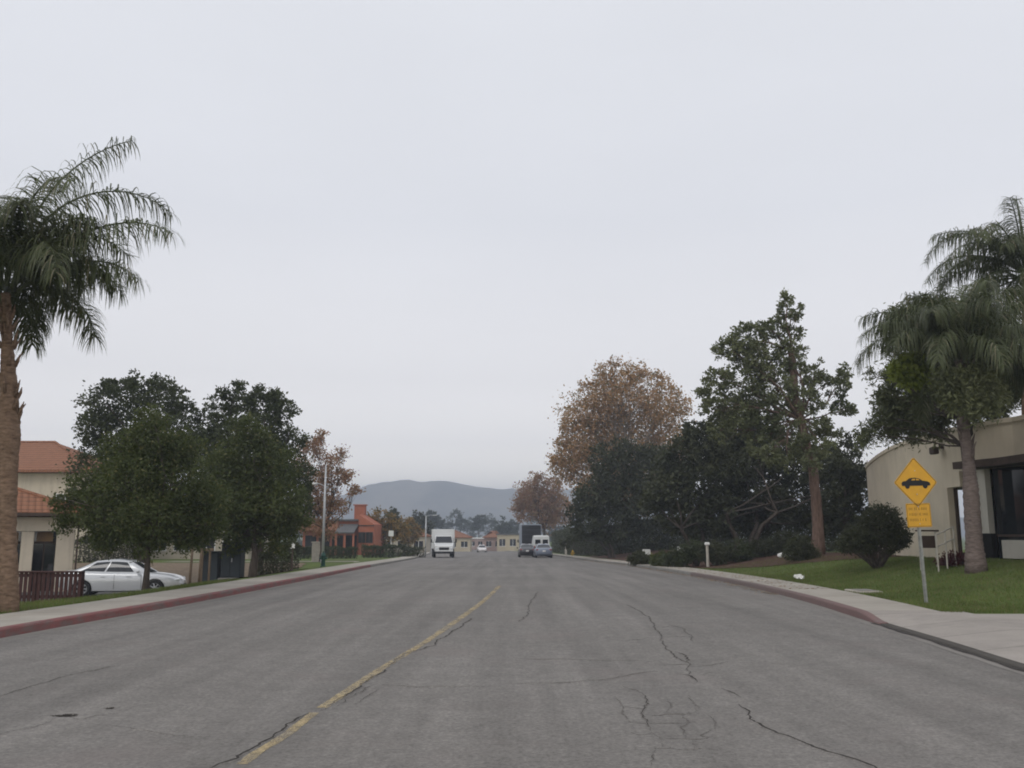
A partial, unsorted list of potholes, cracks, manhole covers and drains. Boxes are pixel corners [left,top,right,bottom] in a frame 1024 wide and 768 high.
crack [382,604,879,768]
crack [518,592,539,622]
